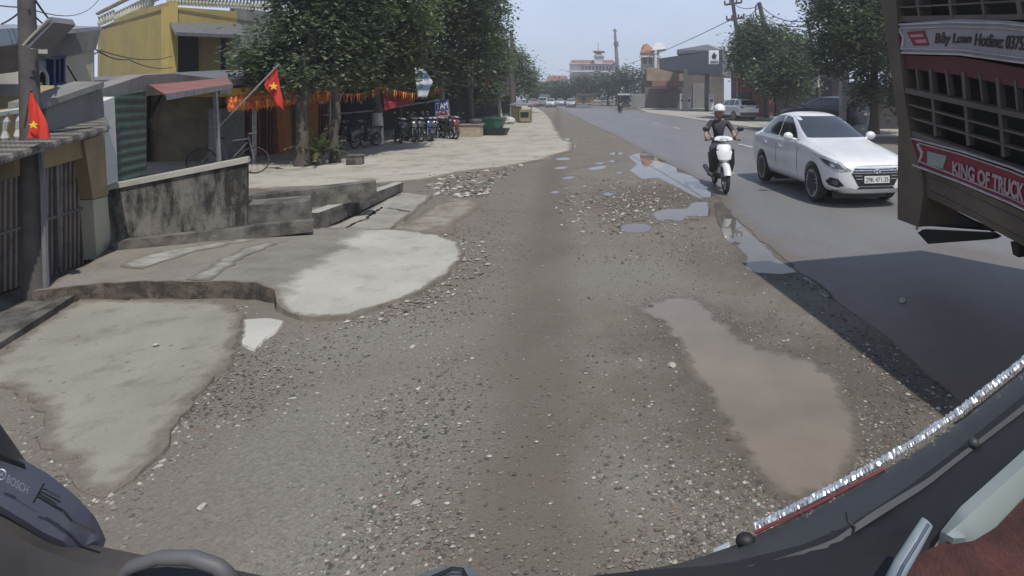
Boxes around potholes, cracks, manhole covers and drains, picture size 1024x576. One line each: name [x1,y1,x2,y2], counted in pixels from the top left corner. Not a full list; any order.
pothole [619,223,653,233]
crack [345,207,410,228]
pothole [714,203,797,274]
pothole [634,295,861,502]
pothole [629,152,715,199]
pothole [651,202,710,222]
